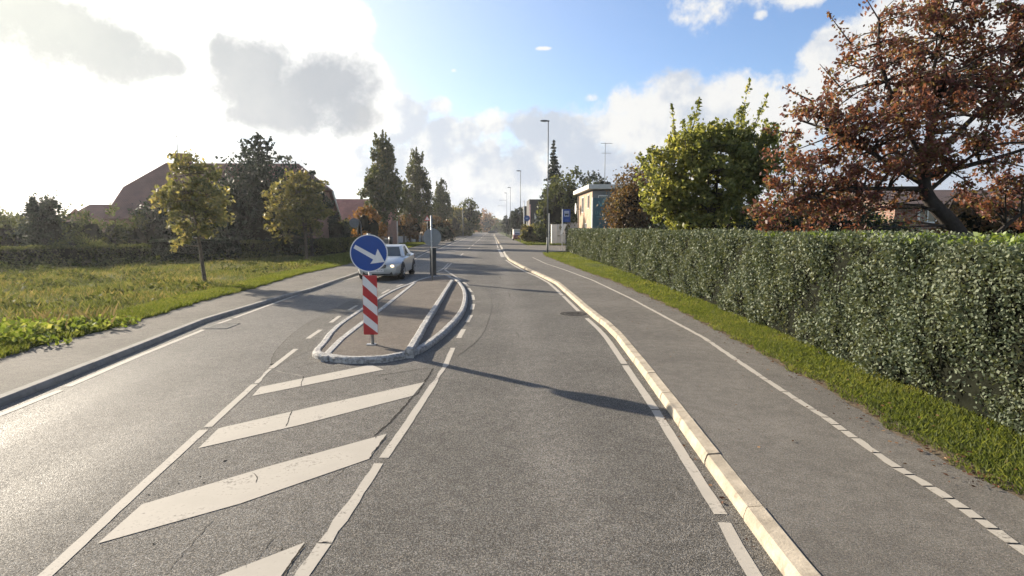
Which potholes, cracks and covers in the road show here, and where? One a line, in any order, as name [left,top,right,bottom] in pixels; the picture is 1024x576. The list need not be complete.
crack [369,368,434,459]
